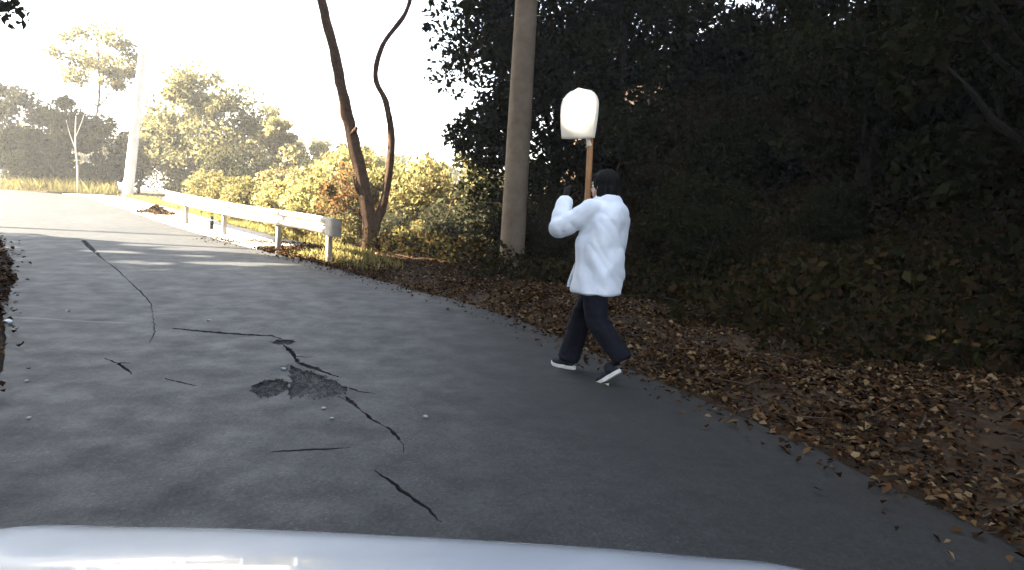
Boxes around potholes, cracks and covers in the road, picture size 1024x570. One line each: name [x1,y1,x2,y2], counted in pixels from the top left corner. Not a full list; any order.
crack [375,470,441,522]
crack [173,328,405,453]
crack [104,358,132,375]
pothole [249,378,290,398]
pothole [286,364,351,400]
